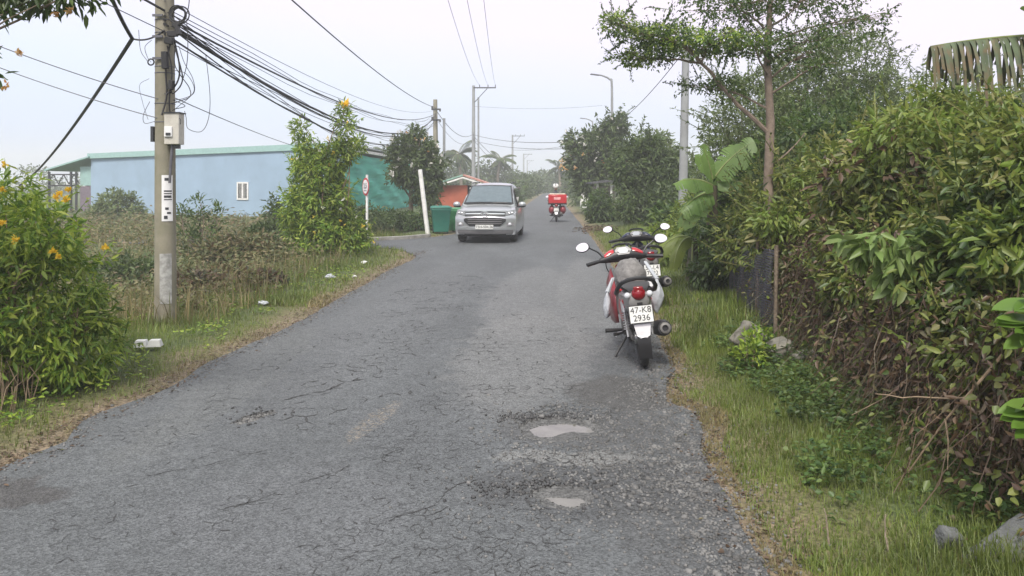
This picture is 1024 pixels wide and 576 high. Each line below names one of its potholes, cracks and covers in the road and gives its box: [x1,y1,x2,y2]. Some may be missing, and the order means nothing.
crack [114,321,458,460]
crack [419,311,620,425]
pothole [222,406,295,428]
pothole [485,410,611,442]
crack [380,276,507,321]
crack [44,421,741,576]
